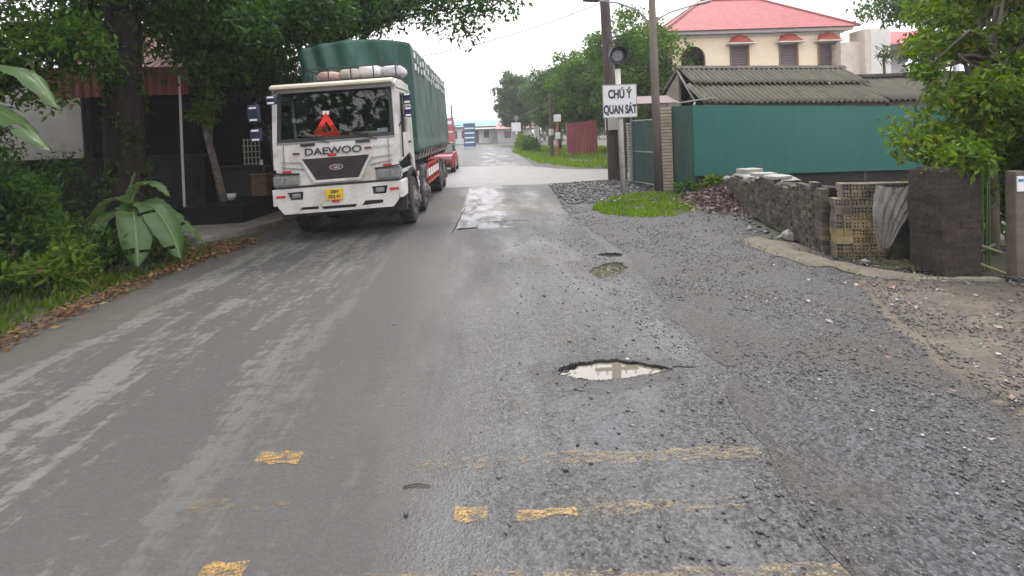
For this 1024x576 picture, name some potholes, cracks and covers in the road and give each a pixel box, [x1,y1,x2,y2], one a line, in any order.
pothole [587,261,629,279]
pothole [552,357,670,382]
